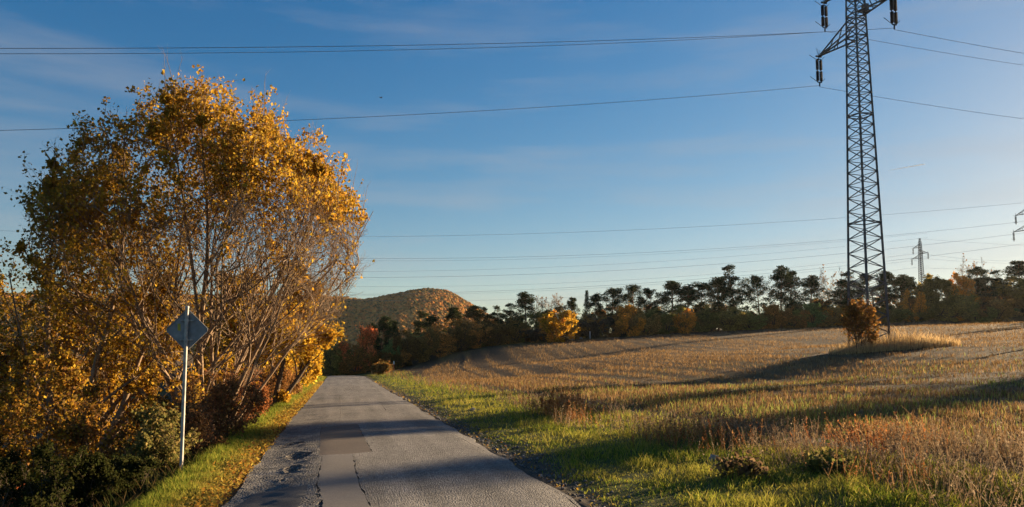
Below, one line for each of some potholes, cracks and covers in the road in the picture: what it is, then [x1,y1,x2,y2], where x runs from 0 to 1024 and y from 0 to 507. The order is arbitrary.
pothole [282,463,308,473]
crack [302,459,323,507]
pothole [279,449,318,463]
crack [352,402,386,507]
